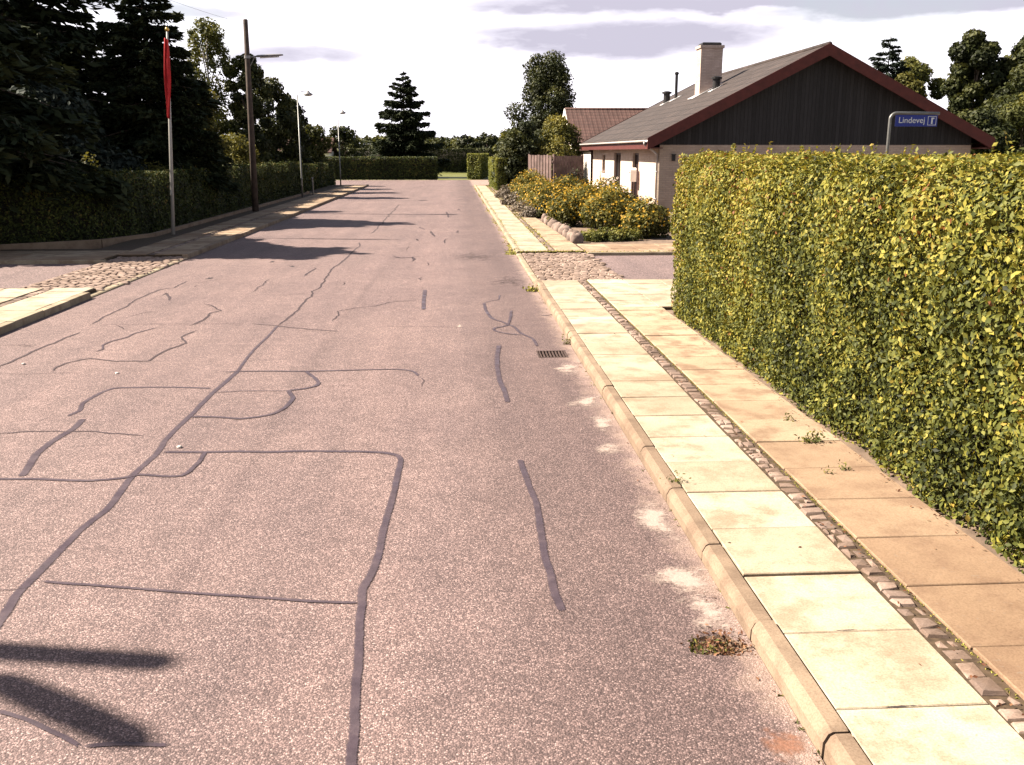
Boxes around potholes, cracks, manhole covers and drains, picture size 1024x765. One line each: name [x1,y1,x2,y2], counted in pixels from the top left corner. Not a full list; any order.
drain grate [536,350,568,358]
crack [0,205,412,374]
crack [394,209,459,280]
pothole [680,624,757,657]
